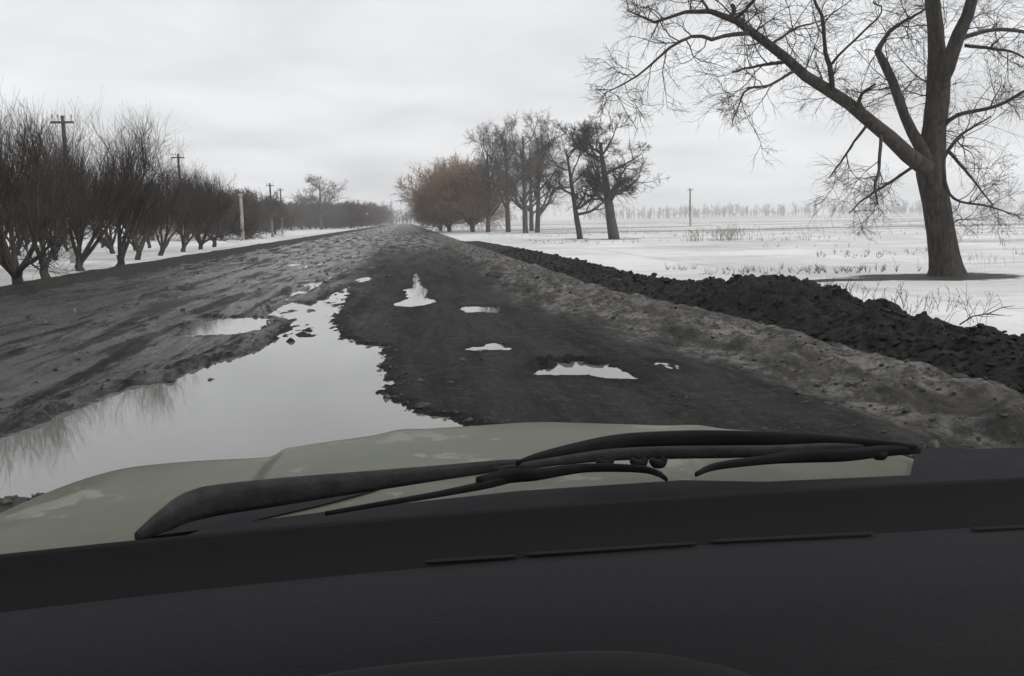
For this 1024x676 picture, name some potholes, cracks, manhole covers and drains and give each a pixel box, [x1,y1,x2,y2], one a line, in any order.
pothole [0,283,500,504]
pothole [457,340,520,352]
pothole [446,304,510,314]
pothole [381,272,444,307]
pothole [516,353,656,381]
